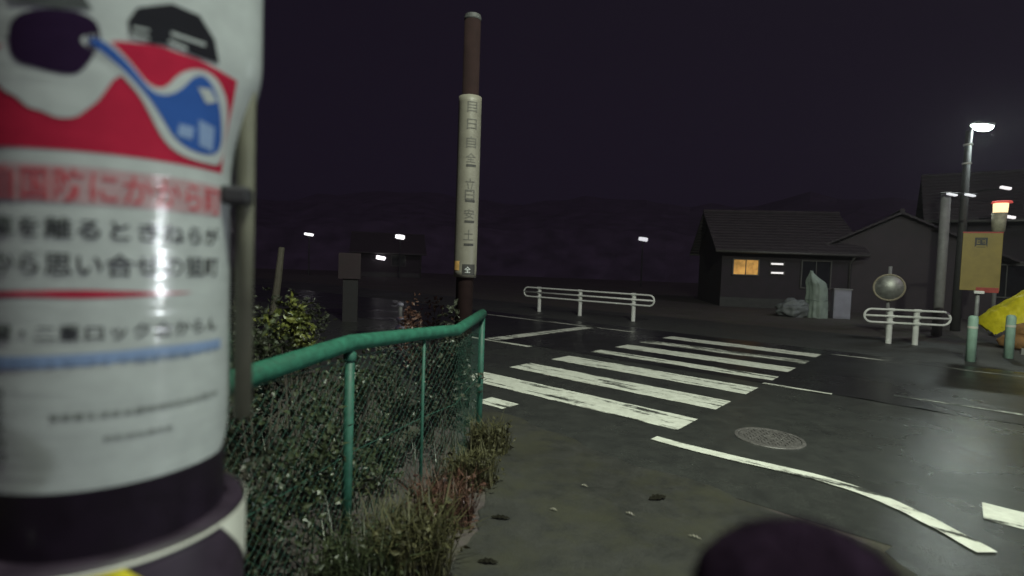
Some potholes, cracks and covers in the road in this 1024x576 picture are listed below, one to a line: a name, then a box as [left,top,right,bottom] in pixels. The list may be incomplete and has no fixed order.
manhole cover [734,427,807,450]
